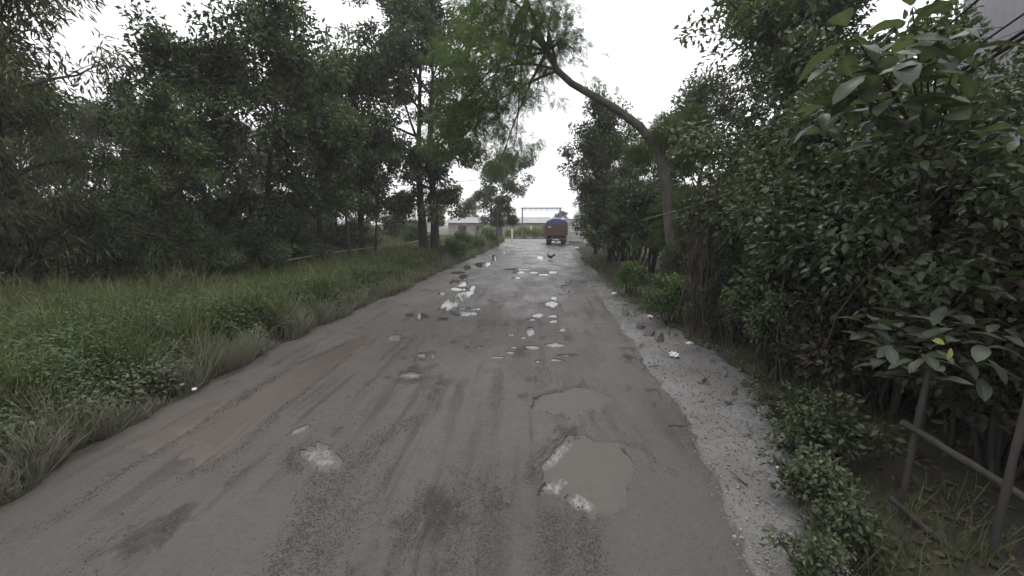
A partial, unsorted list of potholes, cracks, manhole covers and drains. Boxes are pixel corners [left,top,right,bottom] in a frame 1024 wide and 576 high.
pothole [410,312,432,322]
pothole [542,300,562,309]
pothole [531,431,643,523]
pothole [383,333,406,343]
pothole [293,438,349,476]
pothole [393,370,428,381]
pothole [281,422,317,439]
pothole [412,352,432,360]
pothole [524,385,617,421]
pothole [523,326,538,338]
pothole [434,284,478,315]
